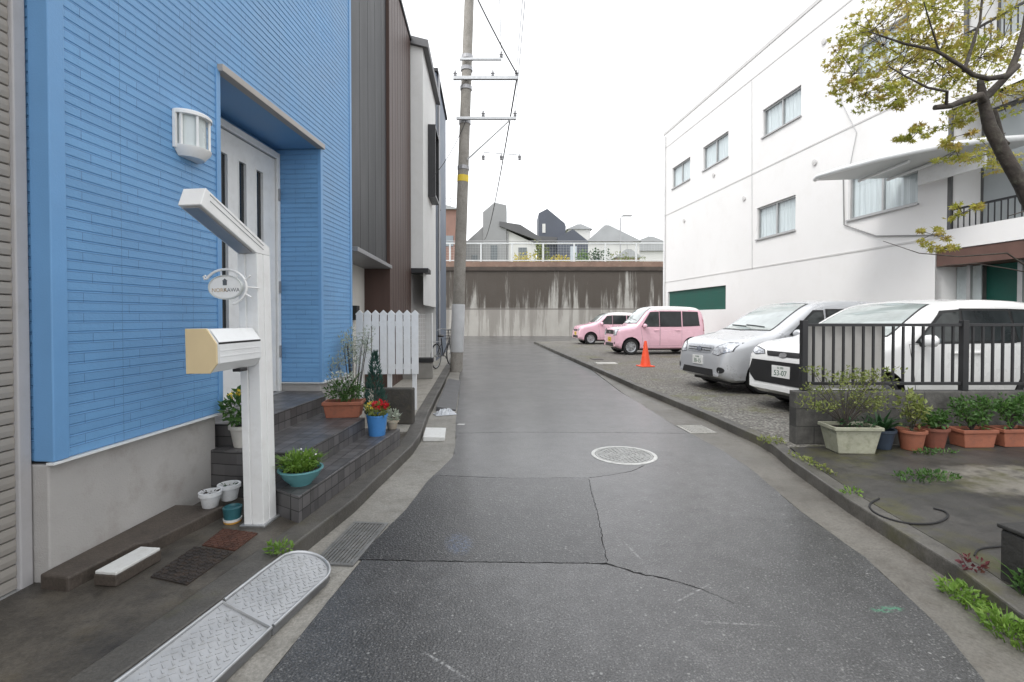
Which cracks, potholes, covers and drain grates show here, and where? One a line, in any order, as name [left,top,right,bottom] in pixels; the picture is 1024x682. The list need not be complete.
manhole cover [591,446,658,465]
drain grate [321,521,388,567]
drain grate [676,425,717,434]
